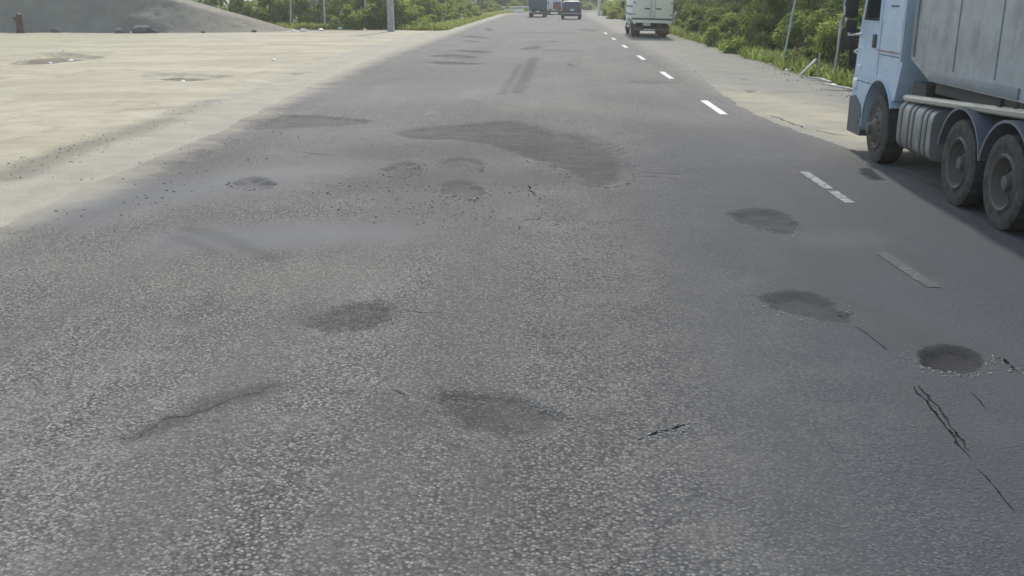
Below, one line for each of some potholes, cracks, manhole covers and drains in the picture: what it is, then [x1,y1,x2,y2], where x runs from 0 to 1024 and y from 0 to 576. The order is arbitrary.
crack [136,382,275,440]
pothole [230,176,278,189]
pothole [915,343,987,374]
crack [914,386,1016,513]
crack [636,424,689,441]
